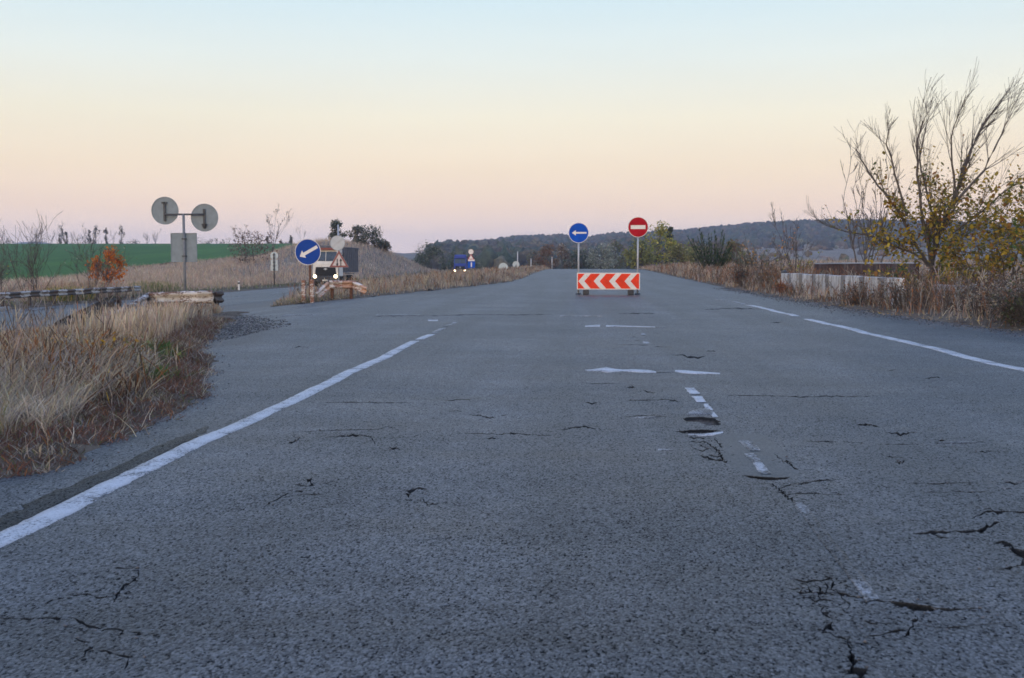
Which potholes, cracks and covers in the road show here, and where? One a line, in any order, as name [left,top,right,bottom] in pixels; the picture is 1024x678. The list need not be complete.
crack [282,426,399,446]
crack [912,480,1024,543]
crack [690,437,733,463]
crack [790,571,1019,678]
crack [445,399,601,439]
crack [1,566,169,670]
